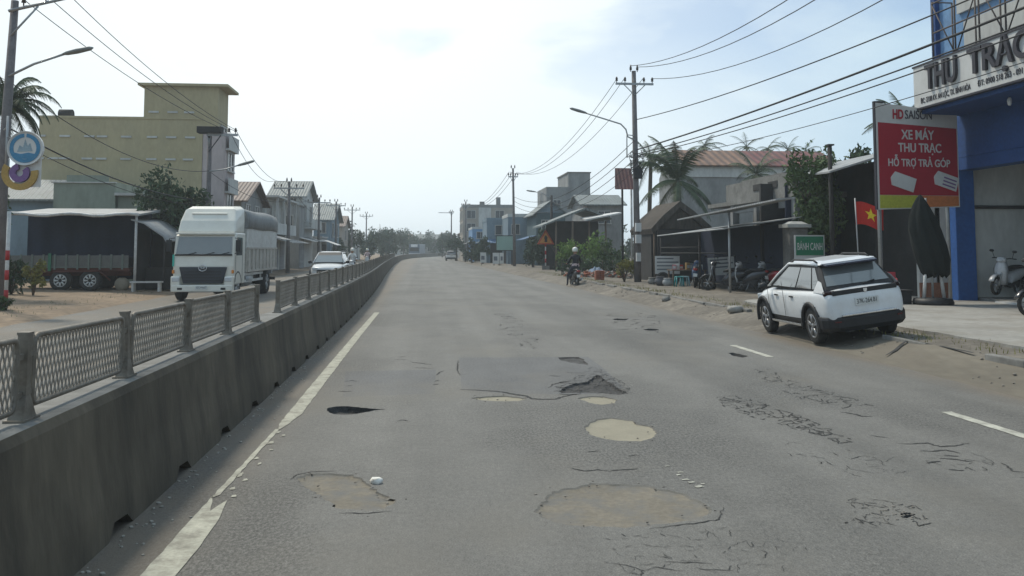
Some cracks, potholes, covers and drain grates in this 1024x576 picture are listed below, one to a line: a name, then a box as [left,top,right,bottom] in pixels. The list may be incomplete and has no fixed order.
pothole [327,406,383,415]
pothole [559,357,588,365]
crack [605,507,808,575]
crack [721,370,1020,477]
pothole [560,375,627,395]
